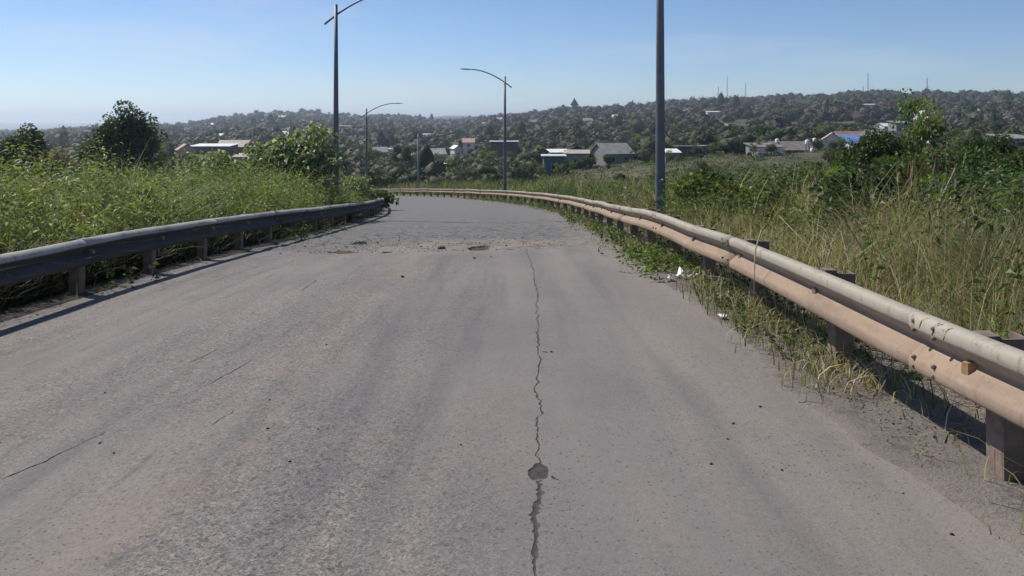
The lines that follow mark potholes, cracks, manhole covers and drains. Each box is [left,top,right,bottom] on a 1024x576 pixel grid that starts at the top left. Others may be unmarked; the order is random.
crack [527,245,560,576]
pothole [528,463,549,480]
crack [6,432,105,478]
